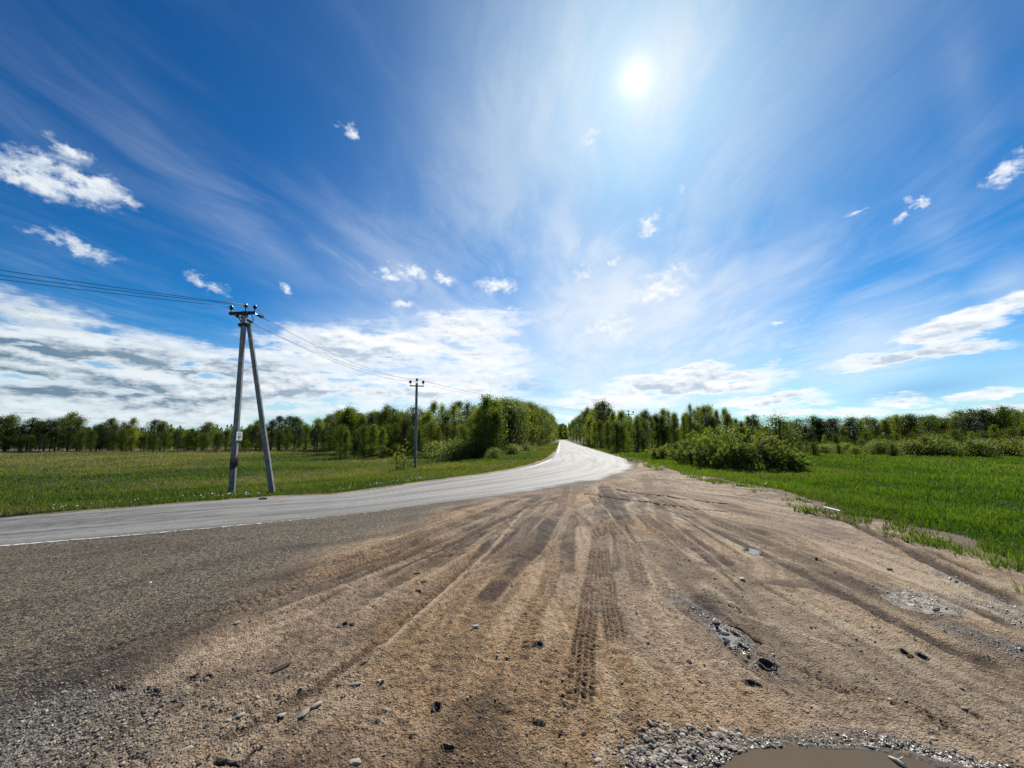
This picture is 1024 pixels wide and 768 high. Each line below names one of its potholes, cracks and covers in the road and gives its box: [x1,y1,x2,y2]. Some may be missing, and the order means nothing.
pothole [660,738,970,768]
pothole [708,618,751,652]
pothole [757,657,778,672]
